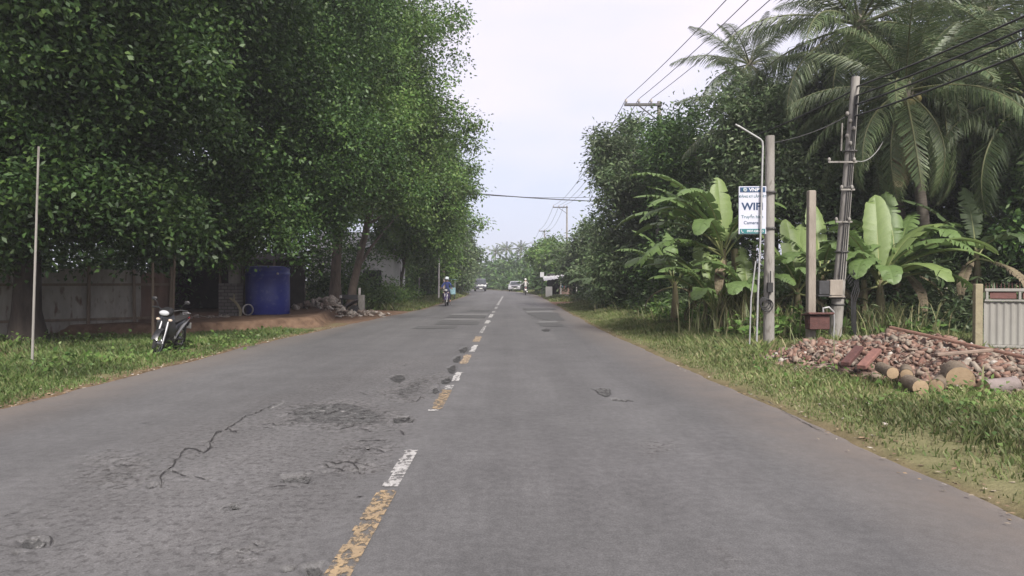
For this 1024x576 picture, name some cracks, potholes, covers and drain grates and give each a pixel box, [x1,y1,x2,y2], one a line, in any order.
pothole [22,539,47,549]
crack [262,392,387,496]
crack [159,404,299,486]
pothole [283,476,312,484]
